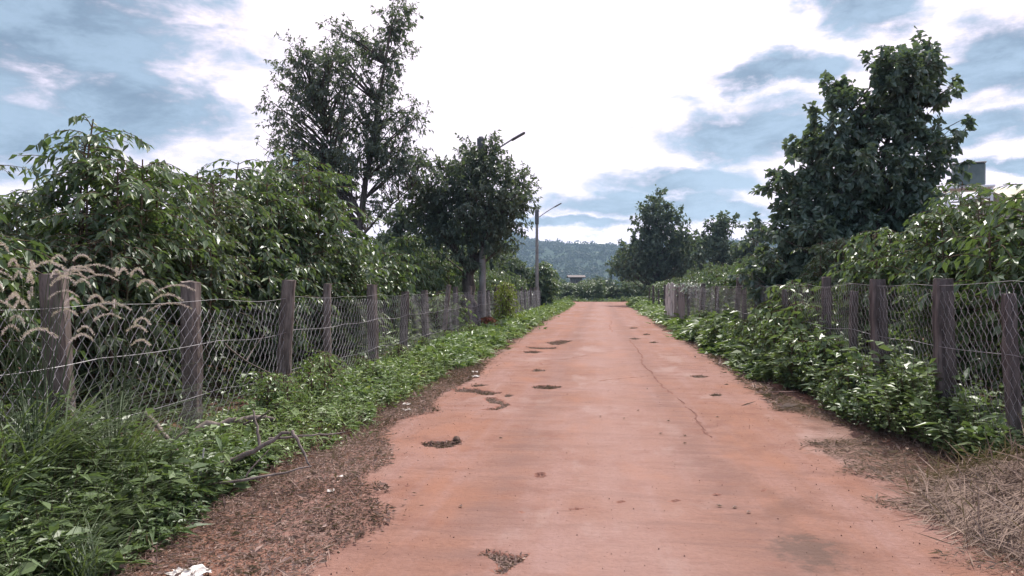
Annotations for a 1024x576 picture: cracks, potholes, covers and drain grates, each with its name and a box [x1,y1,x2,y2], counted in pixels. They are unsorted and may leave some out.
pothole [450,387,502,395]
pothole [478,548,531,576]
pothole [419,437,463,449]
pothole [480,397,511,410]
crack [600,320,712,438]
